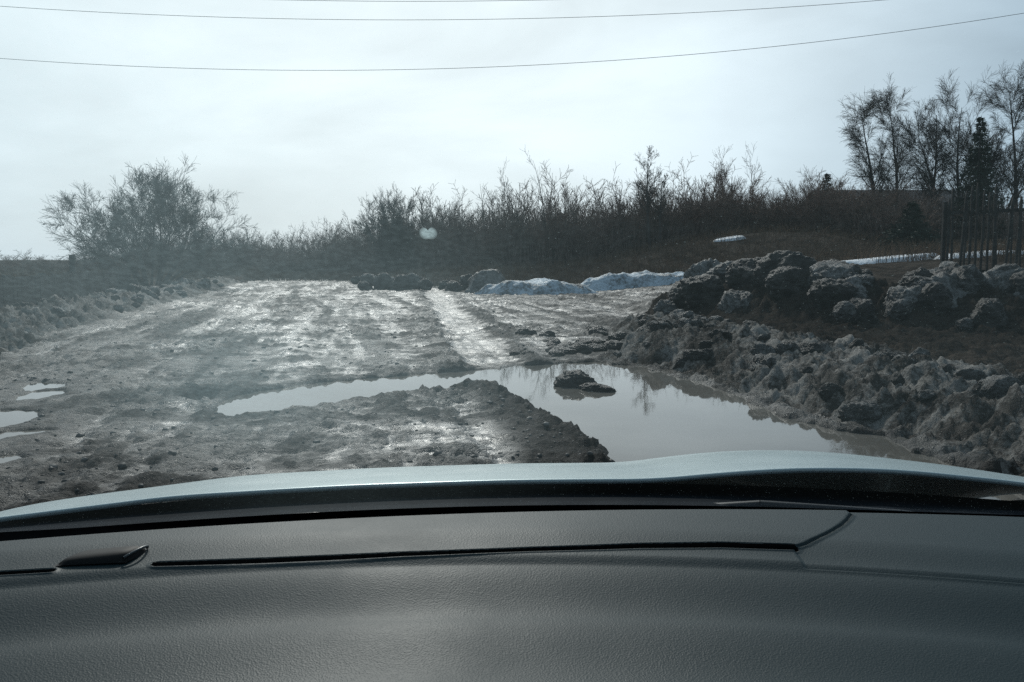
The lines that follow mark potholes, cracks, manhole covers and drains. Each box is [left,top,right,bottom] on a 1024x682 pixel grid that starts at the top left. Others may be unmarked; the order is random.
pothole [198,363,504,421]
pothole [4,379,82,392]
pothole [0,386,93,404]
pothole [0,403,65,428]
